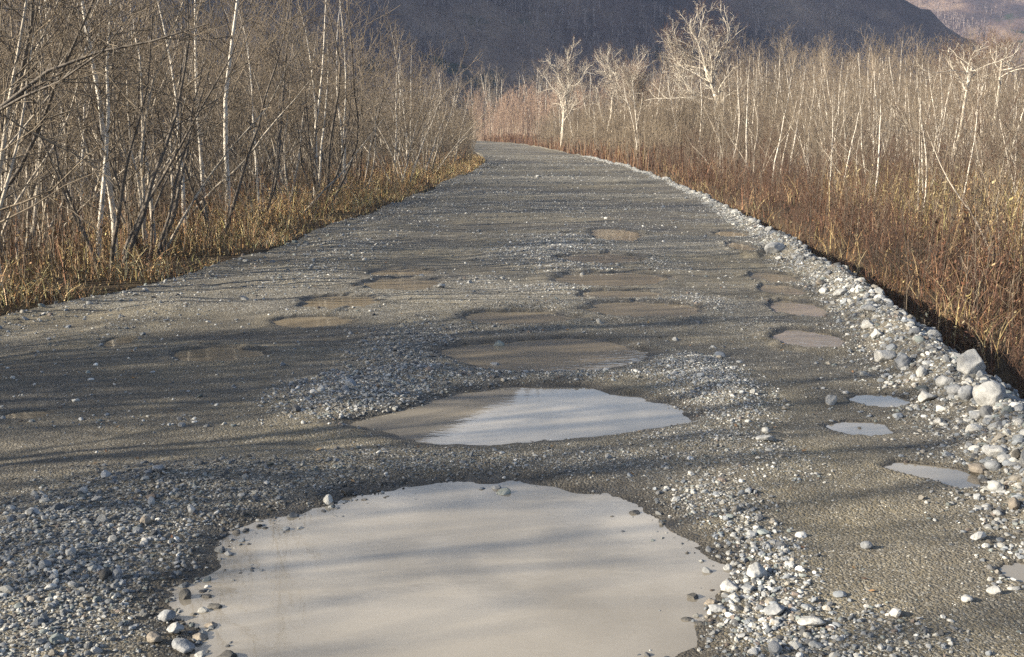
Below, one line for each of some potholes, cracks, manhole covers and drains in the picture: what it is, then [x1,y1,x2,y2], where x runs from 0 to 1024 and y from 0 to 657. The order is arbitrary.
pothole [822,419,899,436]
pothole [575,298,710,317]
